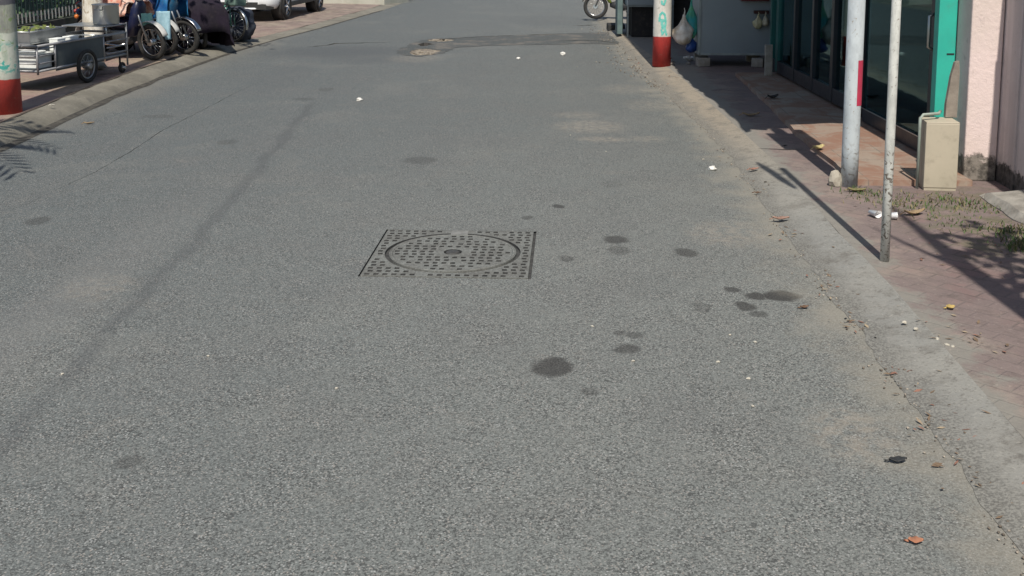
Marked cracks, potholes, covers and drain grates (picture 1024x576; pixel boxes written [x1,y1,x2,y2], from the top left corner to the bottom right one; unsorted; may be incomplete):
manhole cover [358,230,536,279]
crack [46,89,243,195]
